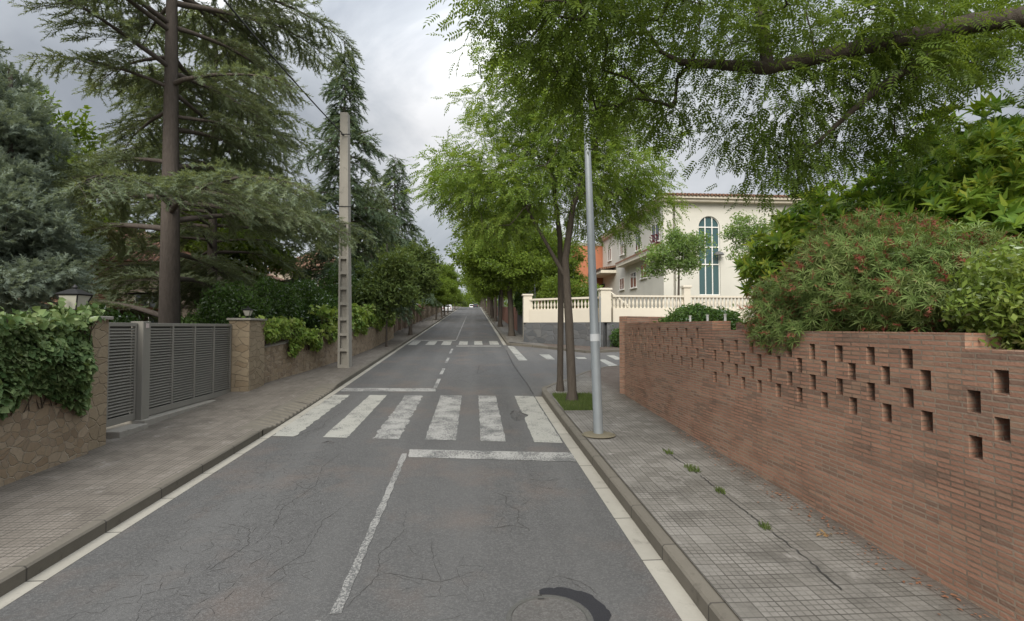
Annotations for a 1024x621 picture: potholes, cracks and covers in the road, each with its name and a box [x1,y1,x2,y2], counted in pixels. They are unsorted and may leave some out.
crack [65,451,339,621]
crack [261,497,358,621]
crack [492,466,553,534]
manhole cover [506,595,592,621]
